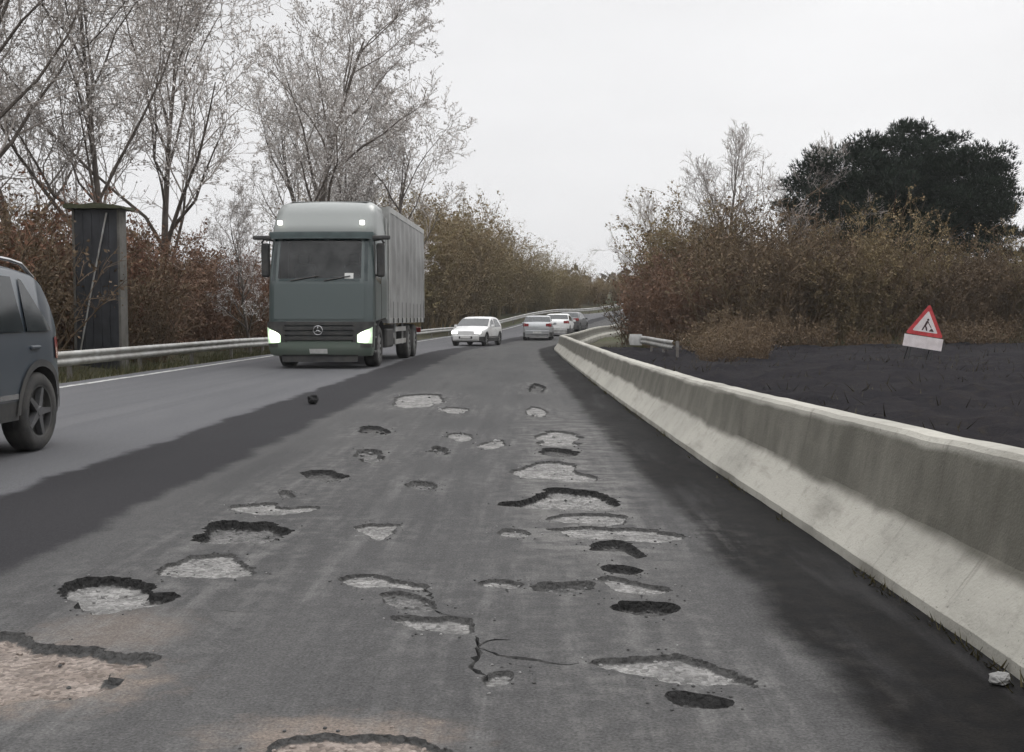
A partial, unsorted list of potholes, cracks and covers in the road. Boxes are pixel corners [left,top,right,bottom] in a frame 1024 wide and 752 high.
pothole [488,485,622,511]
pothole [328,574,432,592]
pothole [576,538,654,559]
pothole [545,526,698,545]
pothole [391,394,448,408]
pothole [300,469,350,483]
pothole [155,550,271,582]
pothole [597,595,686,623]
pothole [361,589,457,614]
pothole [53,572,198,617]
pothole [534,430,584,447]
pothole [180,518,303,545]
